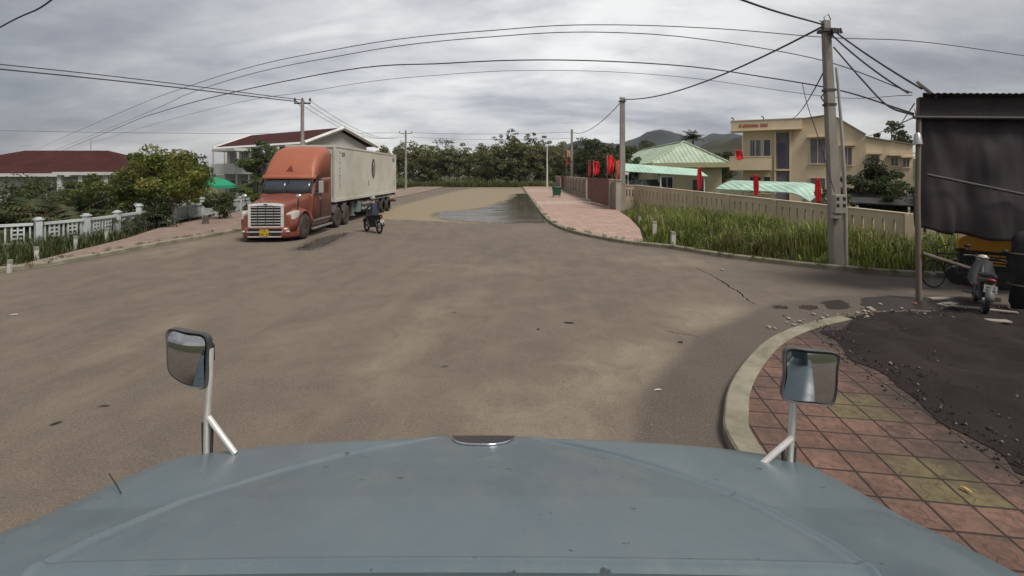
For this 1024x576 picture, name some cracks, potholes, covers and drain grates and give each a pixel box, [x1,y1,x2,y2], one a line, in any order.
crack [695,267,754,304]
